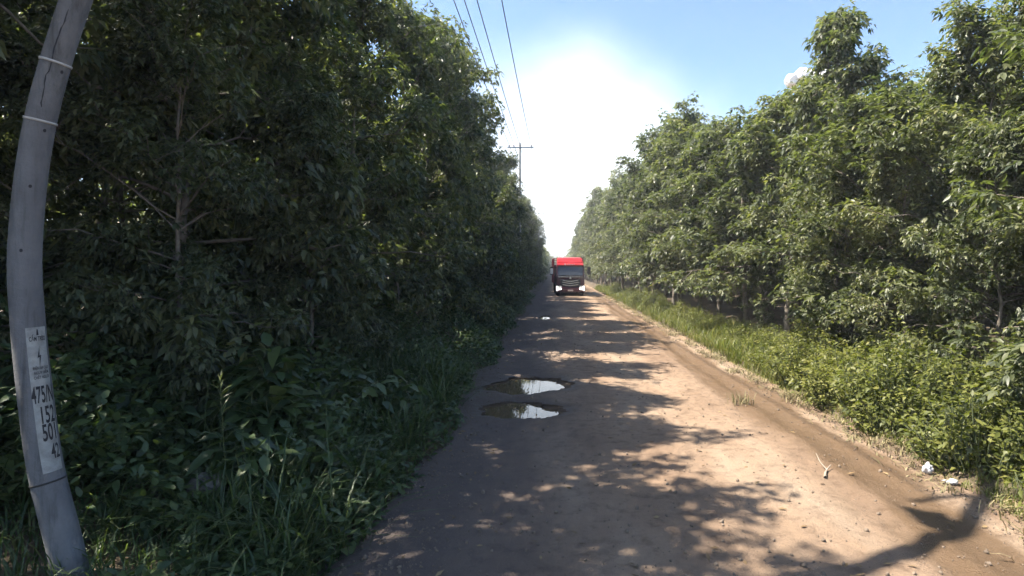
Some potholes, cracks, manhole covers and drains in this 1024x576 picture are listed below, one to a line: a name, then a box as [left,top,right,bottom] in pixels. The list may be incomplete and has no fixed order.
pothole [483,376,575,395]
pothole [478,401,569,419]
